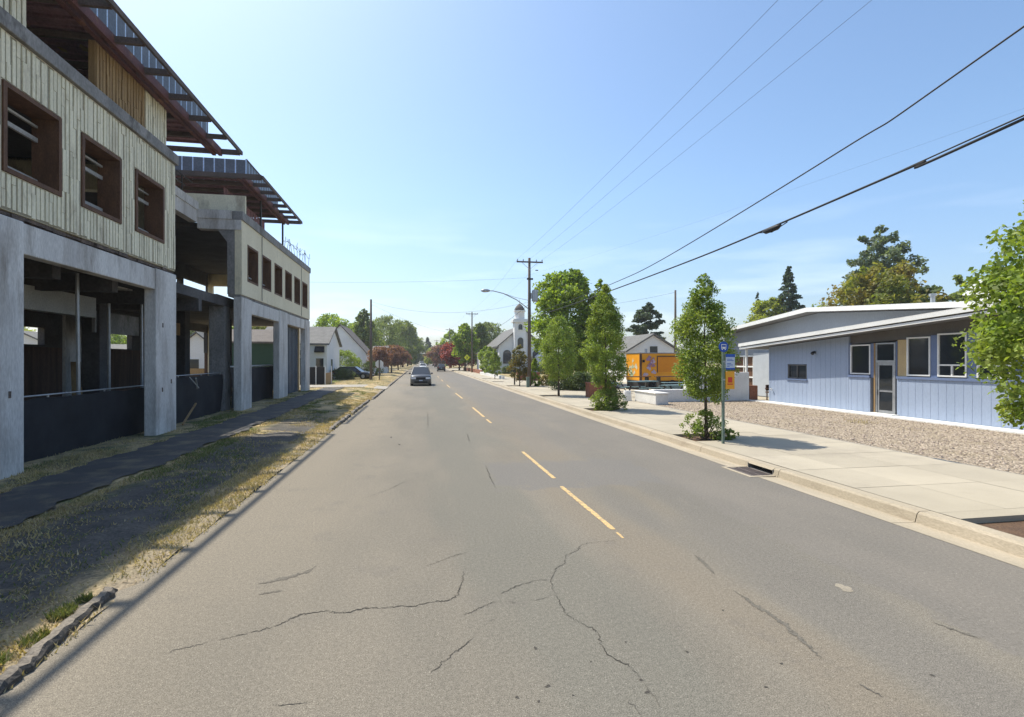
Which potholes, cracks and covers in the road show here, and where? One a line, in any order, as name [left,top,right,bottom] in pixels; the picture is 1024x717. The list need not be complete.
drain grate [722,463,783,478]
crack [934,622,981,639]
crack [211,538,660,715]
